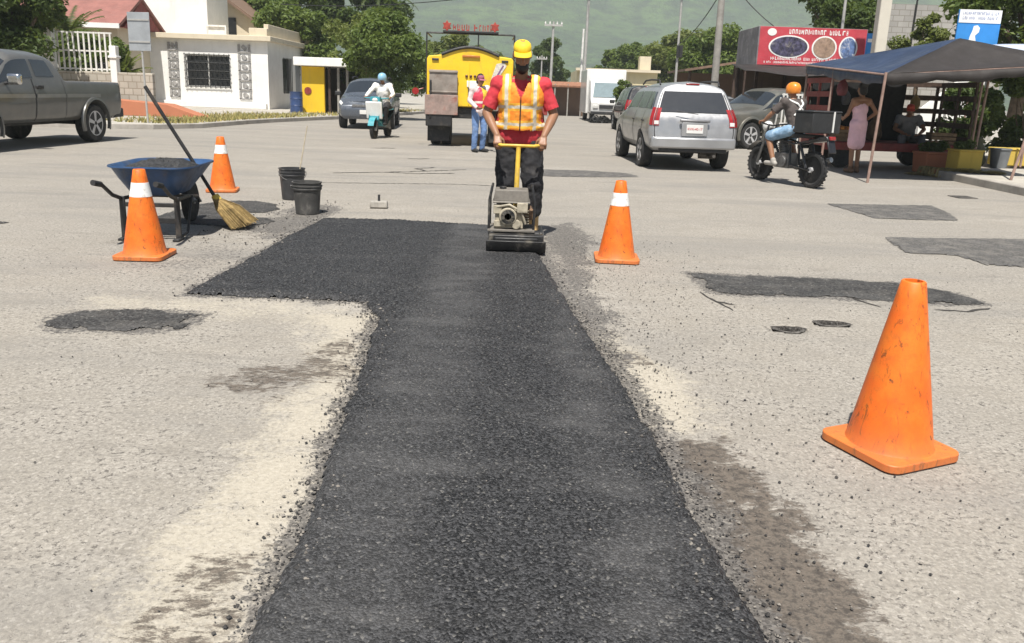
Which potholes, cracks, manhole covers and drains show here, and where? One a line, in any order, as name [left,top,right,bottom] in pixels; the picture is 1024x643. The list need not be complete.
pothole [770,326,807,334]
